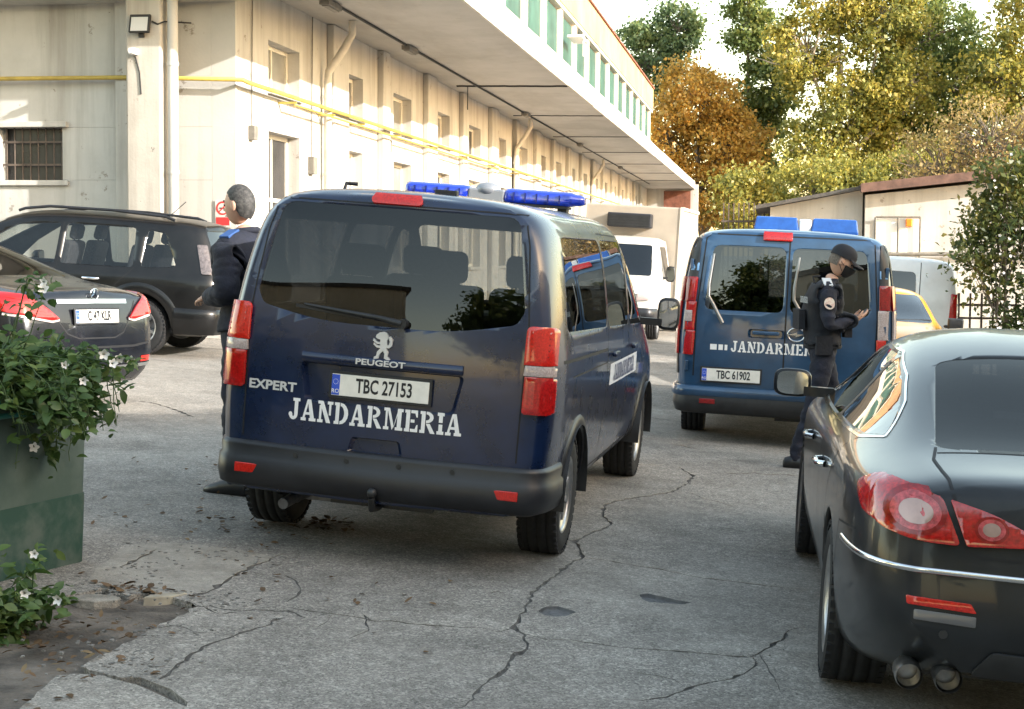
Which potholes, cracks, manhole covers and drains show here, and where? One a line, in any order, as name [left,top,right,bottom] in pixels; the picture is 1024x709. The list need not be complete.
crack [153,468,805,709]
